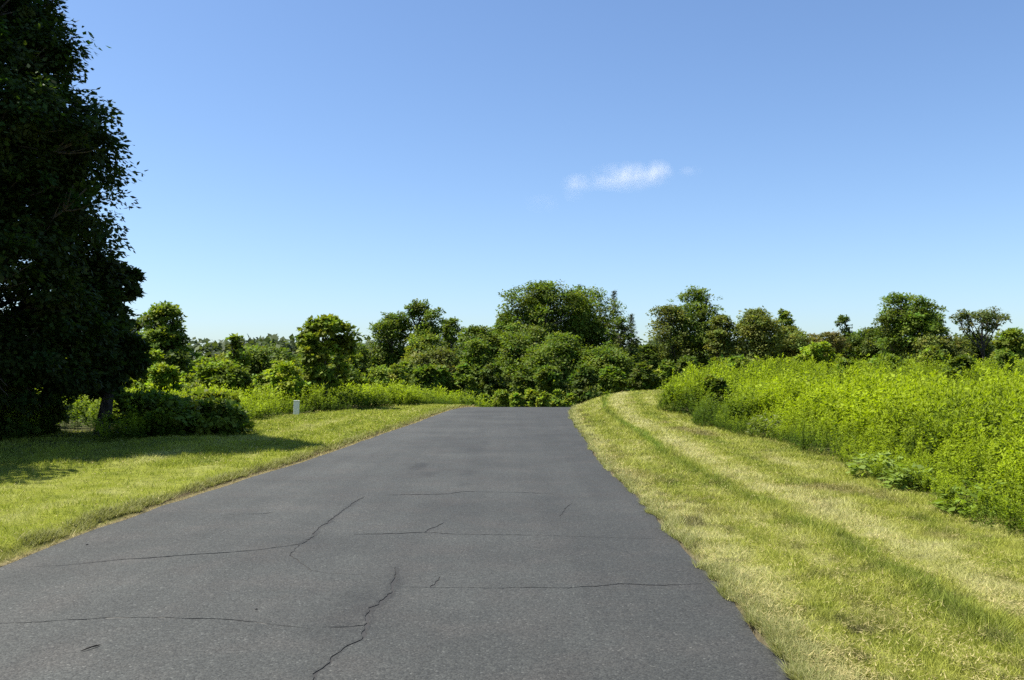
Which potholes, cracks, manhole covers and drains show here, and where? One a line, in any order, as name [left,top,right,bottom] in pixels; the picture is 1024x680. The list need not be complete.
crack [403,491,572,518]
crack [0,496,688,680]
